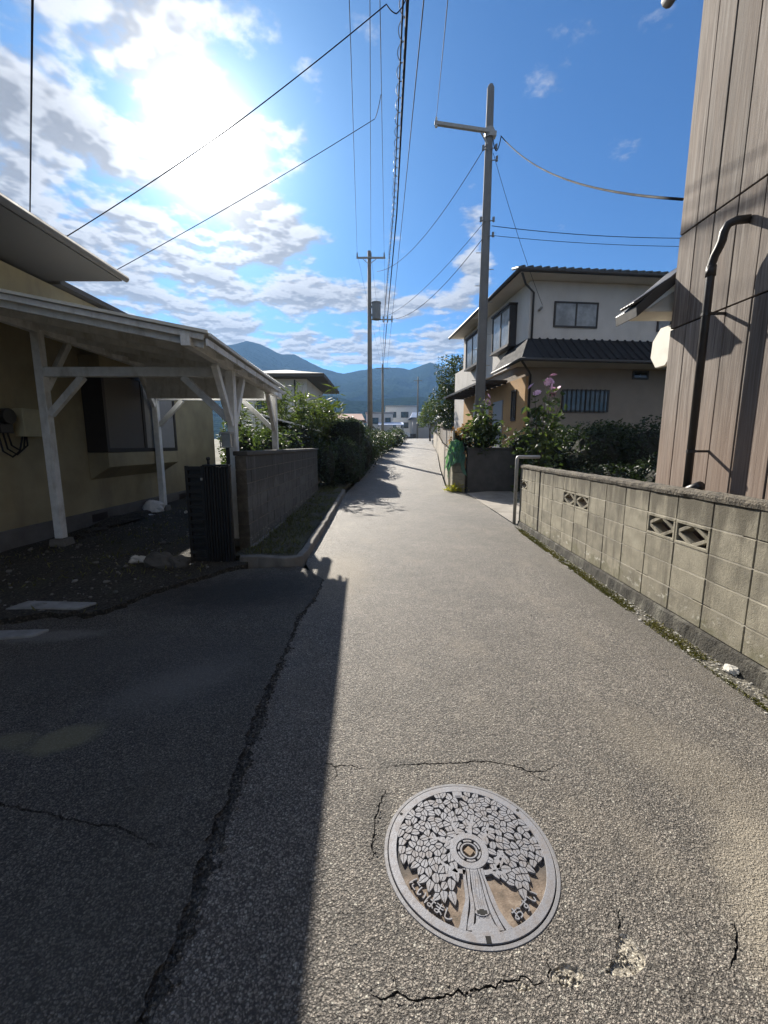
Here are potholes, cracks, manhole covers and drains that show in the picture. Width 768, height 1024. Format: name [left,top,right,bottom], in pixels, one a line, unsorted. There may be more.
crack [321,761,361,778]
pothole [550,963,583,988]
crack [363,958,552,1006]
crack [0,800,193,854]
crack [384,759,558,781]
pothole [605,934,645,977]
crack [368,791,389,860]
crack [724,918,744,969]
manhole cover [384,784,561,952]
